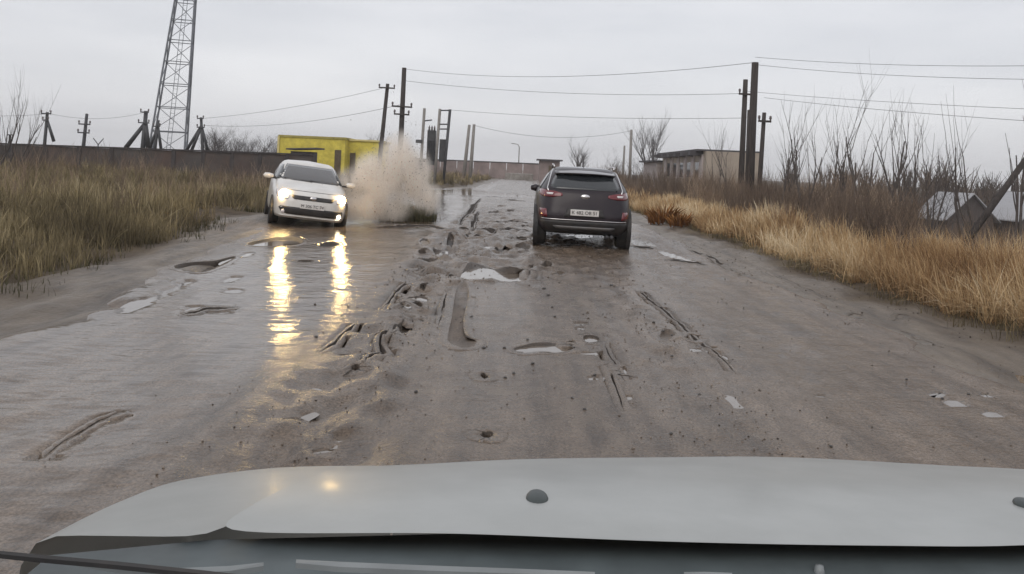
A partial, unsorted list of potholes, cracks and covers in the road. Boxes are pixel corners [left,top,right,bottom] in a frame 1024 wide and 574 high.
pothole [450,262,538,283]
pothole [243,236,308,247]
pothole [504,341,586,356]
pothole [464,427,509,444]
pothole [574,333,609,345]
pothole [167,256,241,274]
pothole [436,279,487,352]
